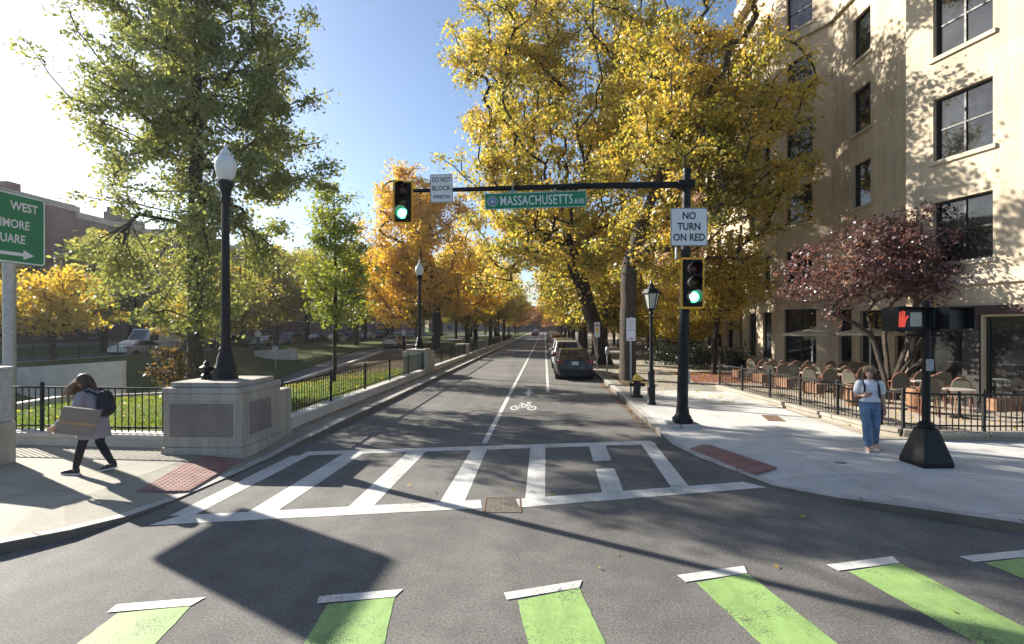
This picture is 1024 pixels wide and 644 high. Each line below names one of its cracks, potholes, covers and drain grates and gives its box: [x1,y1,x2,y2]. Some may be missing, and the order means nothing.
manhole cover [483,497,522,513]
